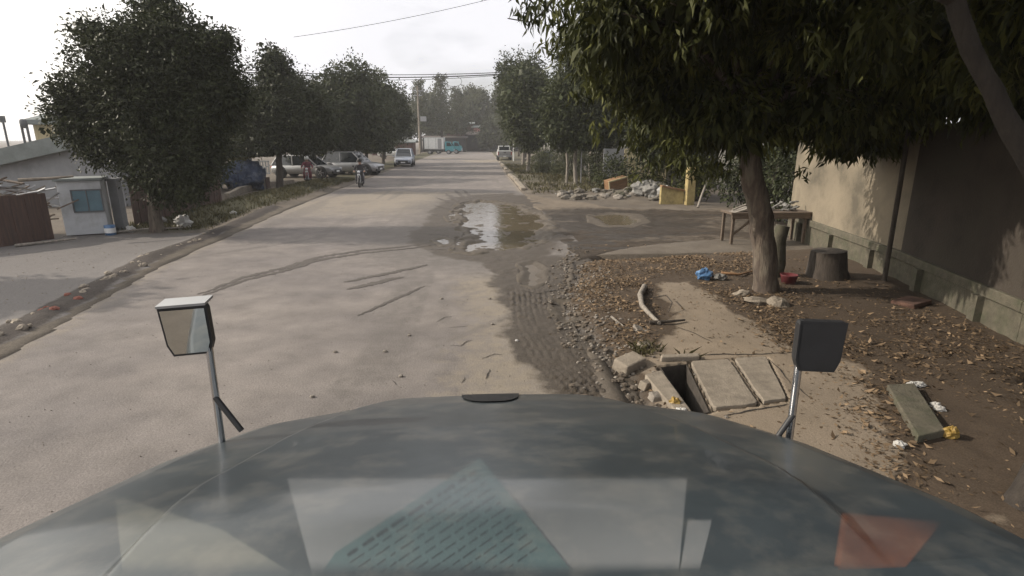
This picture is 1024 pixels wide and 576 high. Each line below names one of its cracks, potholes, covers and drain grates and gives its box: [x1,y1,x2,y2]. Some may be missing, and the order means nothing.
pothole [586,212,651,228]
pothole [447,199,559,256]
